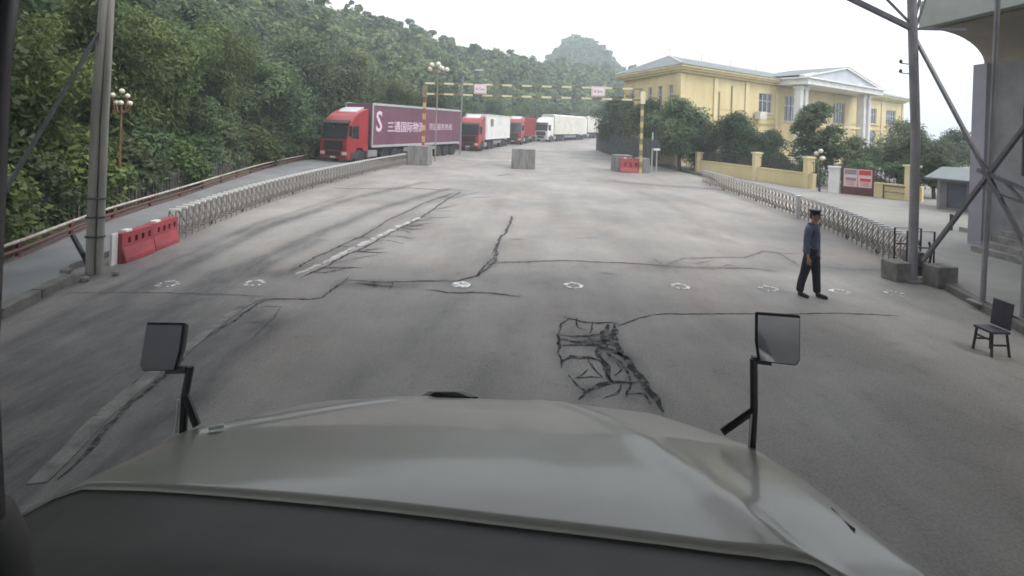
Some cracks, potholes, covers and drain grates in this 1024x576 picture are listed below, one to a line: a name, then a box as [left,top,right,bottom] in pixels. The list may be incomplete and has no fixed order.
crack [64,216,798,337]
crack [556,317,664,412]
